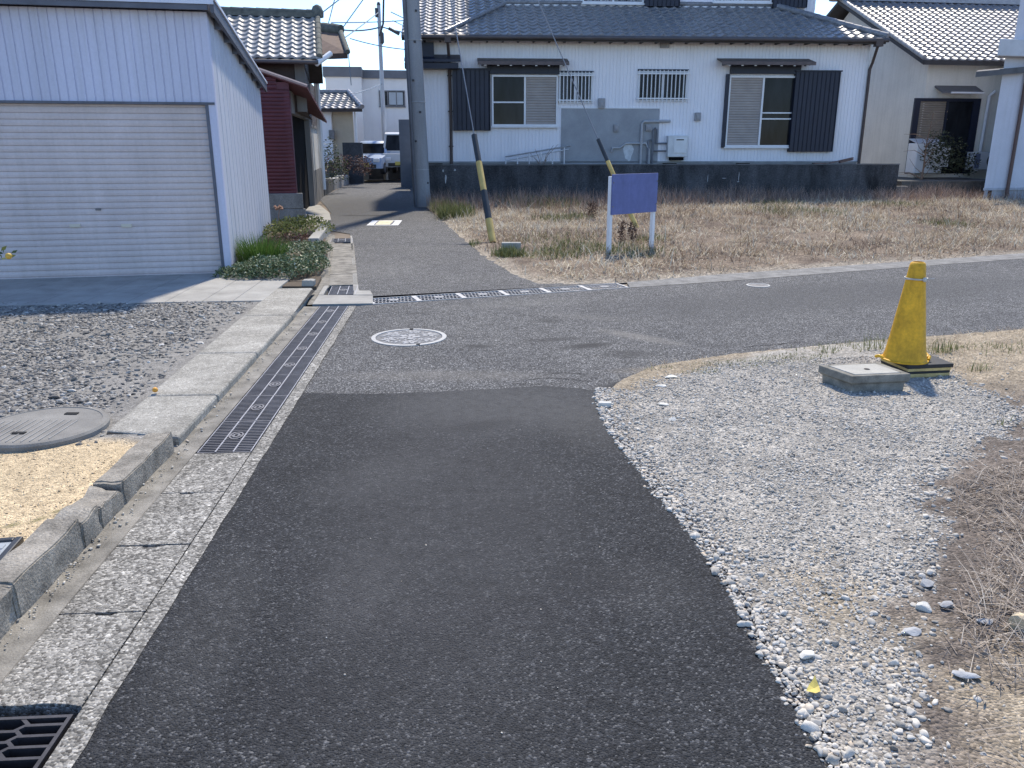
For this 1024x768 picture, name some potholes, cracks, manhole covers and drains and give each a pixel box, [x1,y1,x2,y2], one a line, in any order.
drain grate [0,714,74,768]
drain grate [278,341,325,357]
drain grate [302,316,341,328]
drain grate [263,356,315,375]
drain grate [224,395,289,422]
drain grate [197,420,272,454]
drain grate [458,290,508,299]
drain grate [328,286,358,295]
drain grate [541,285,590,293]
drain grate [373,296,420,305]
drain grate [311,306,348,317]
drain grate [245,374,303,396]
